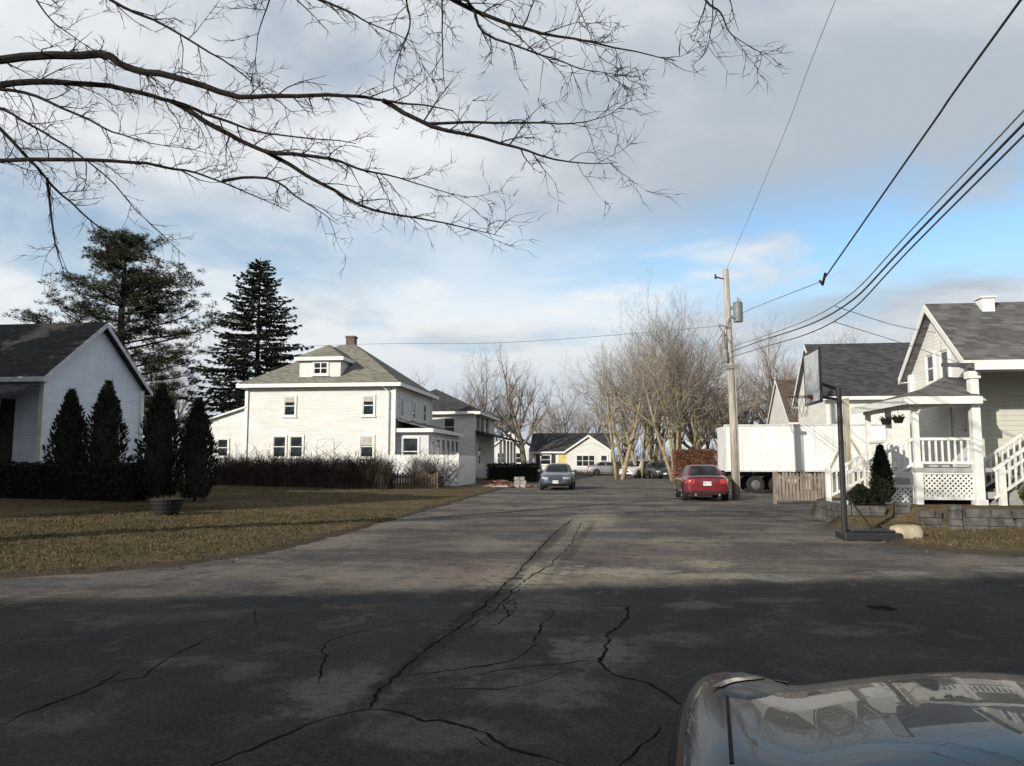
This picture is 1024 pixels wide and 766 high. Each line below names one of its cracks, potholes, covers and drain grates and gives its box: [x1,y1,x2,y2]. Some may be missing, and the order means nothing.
crack [210,519,681,766]
crack [2,639,206,726]
